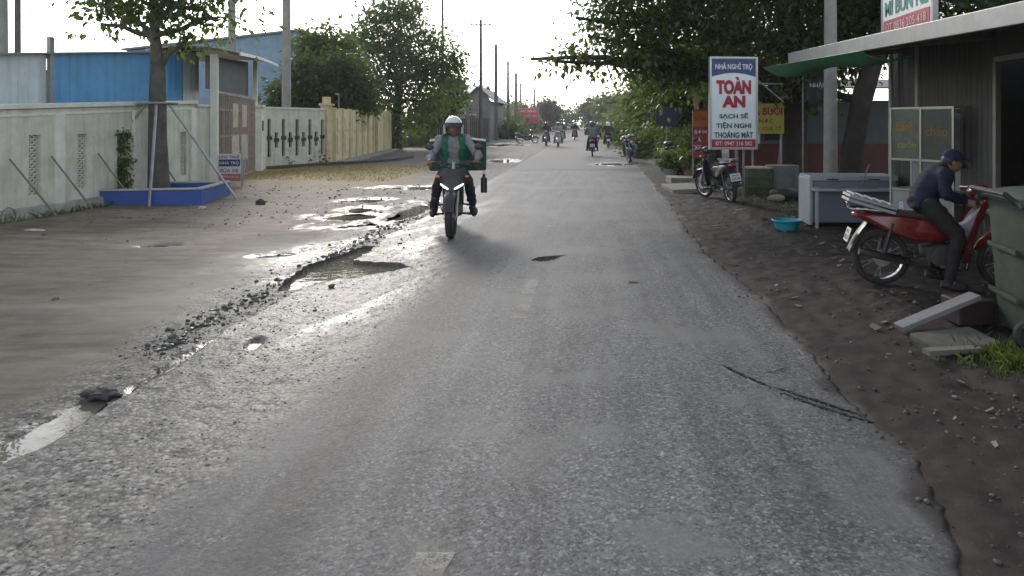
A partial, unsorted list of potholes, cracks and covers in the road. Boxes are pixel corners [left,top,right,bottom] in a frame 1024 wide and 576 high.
crack [719,365,873,424]
pothole [274,245,413,293]
